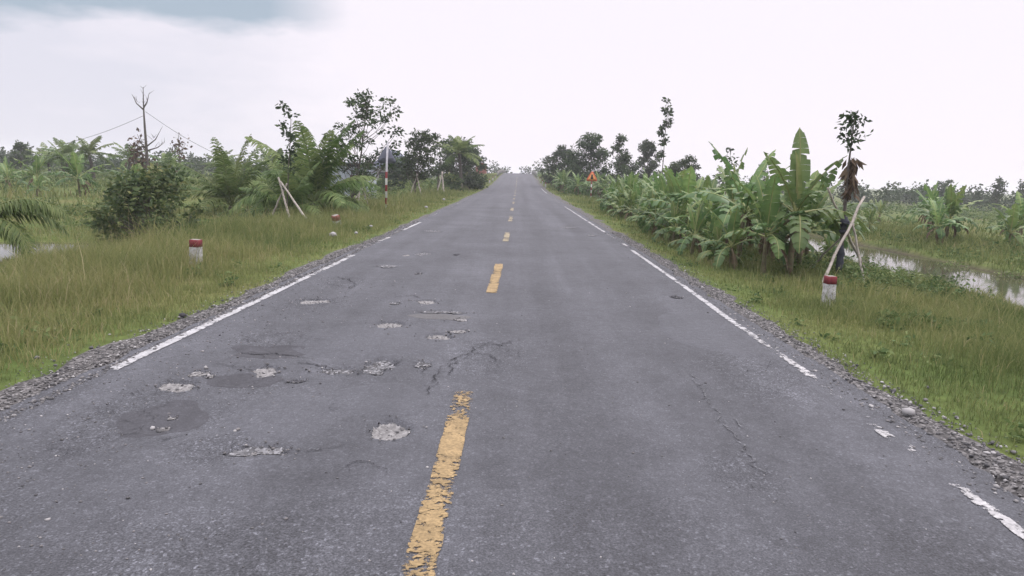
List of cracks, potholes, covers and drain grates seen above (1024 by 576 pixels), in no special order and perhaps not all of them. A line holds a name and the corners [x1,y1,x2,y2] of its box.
crack [690,354,808,489]
pothole [160,383,194,392]
crack [48,332,519,461]
pothole [363,360,395,376]
pothole [255,367,277,378]
pothole [370,423,410,440]
pothole [229,446,285,457]
